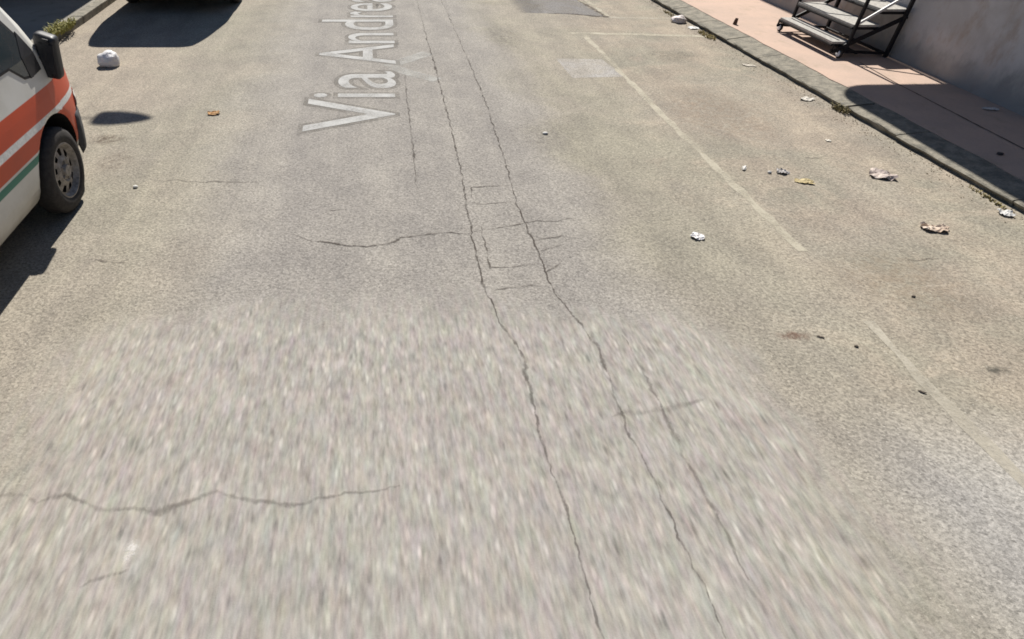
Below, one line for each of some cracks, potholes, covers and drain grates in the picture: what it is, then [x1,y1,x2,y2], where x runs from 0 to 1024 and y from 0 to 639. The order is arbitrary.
crack [299,5,581,323]
